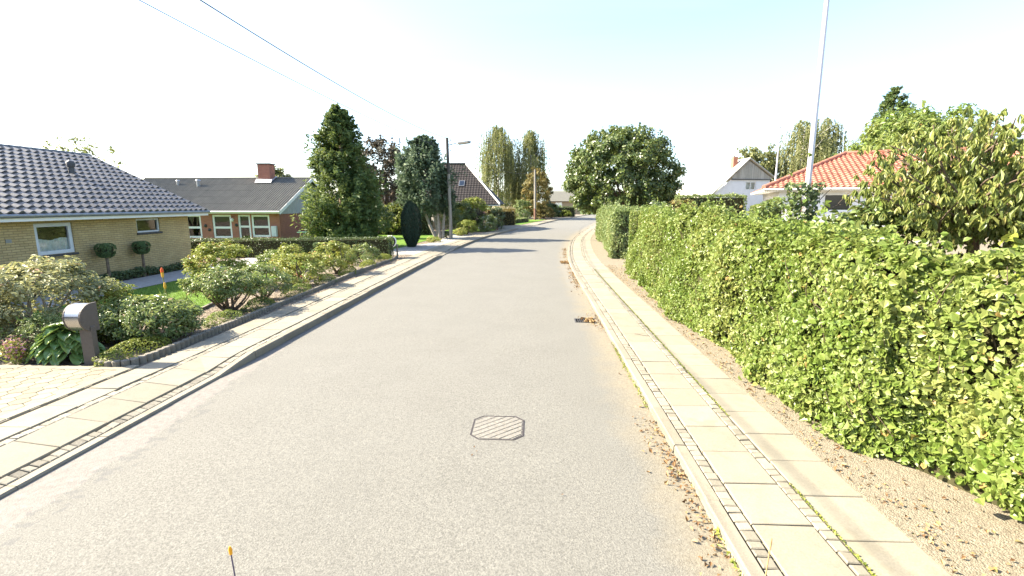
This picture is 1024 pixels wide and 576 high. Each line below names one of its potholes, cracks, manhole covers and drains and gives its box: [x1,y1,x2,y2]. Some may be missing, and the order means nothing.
manhole cover [470,416,524,441]
